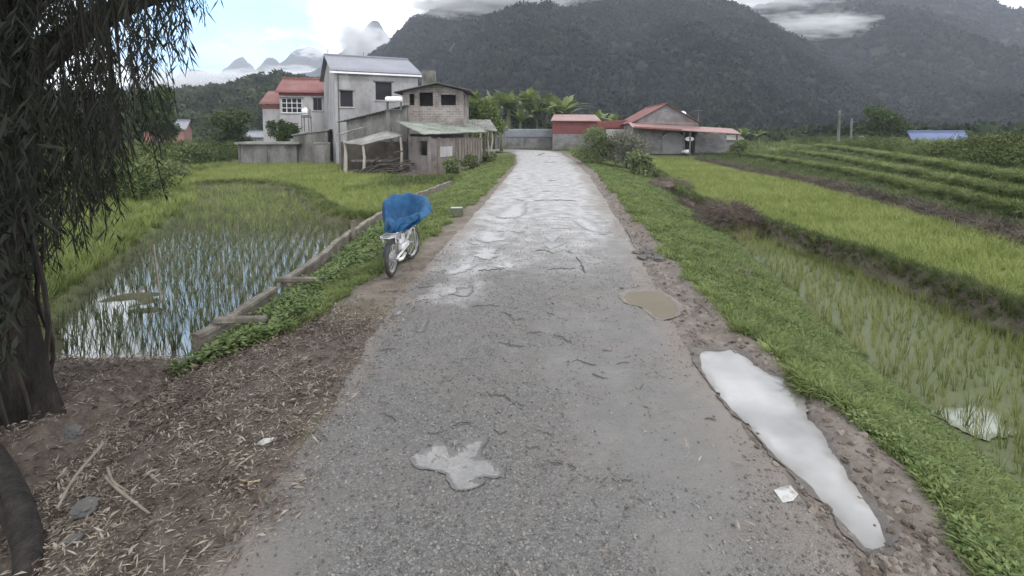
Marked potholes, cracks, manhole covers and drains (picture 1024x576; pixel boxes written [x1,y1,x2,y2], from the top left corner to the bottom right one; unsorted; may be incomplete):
crack [473,304,571,347]
crack [531,250,586,274]
crack [486,391,524,406]
crack [468,199,573,245]
crack [525,430,577,468]
pothole [619,288,683,320]
crack [428,421,471,435]
crack [576,349,628,378]
